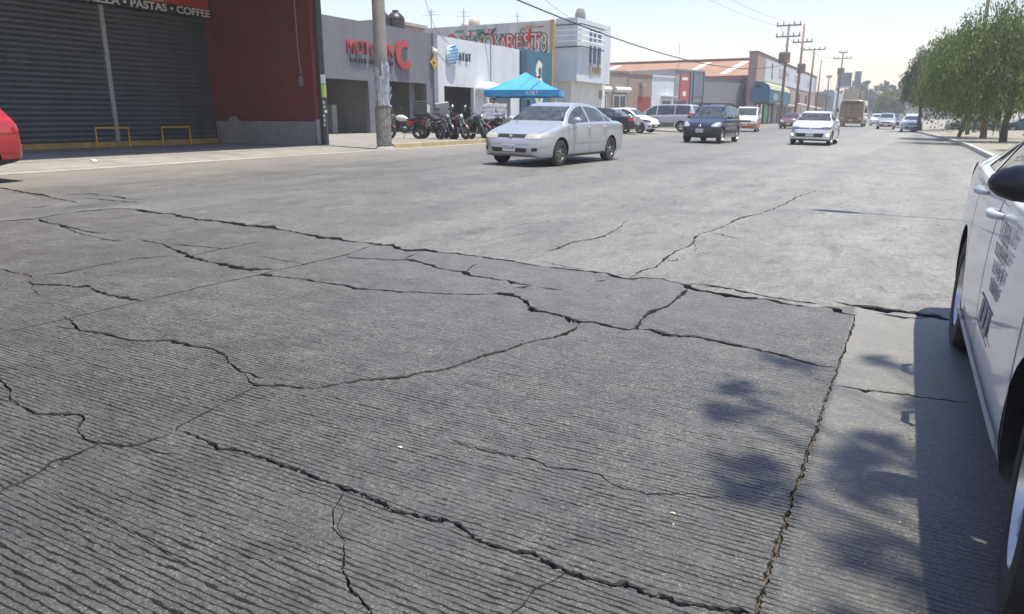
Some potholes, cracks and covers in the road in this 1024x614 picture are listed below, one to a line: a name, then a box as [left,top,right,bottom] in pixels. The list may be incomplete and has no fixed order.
crack [0,187,950,389]
crack [0,379,751,614]
crack [838,385,958,402]
